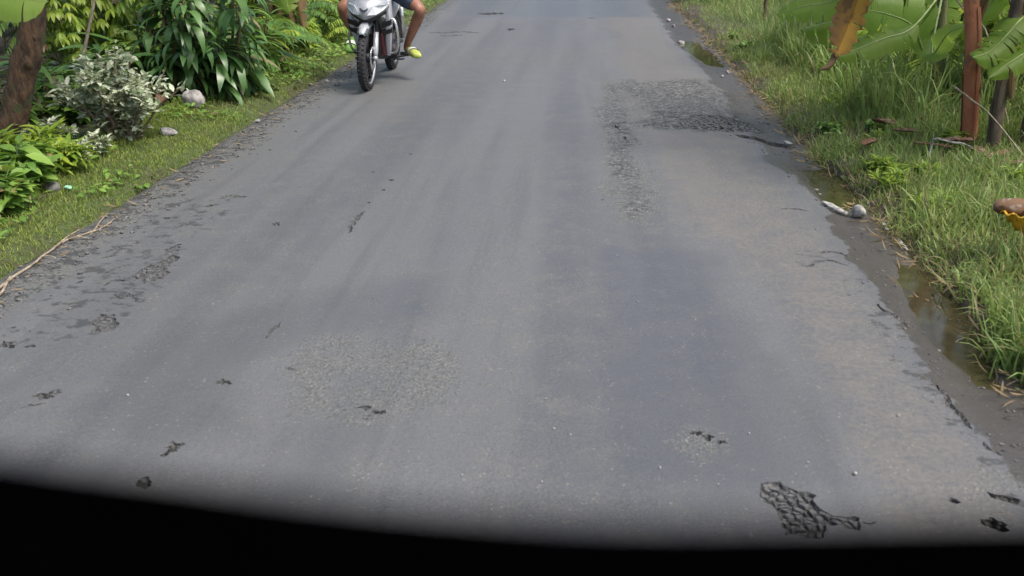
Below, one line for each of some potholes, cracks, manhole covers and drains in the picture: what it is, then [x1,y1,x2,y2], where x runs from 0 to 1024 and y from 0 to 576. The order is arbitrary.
pothole [165,441,185,455]
crack [348,212,364,233]
crack [759,481,860,520]
pothole [29,389,62,399]
crack [806,250,847,267]
pothole [987,492,1020,504]
crack [936,385,1001,456]
